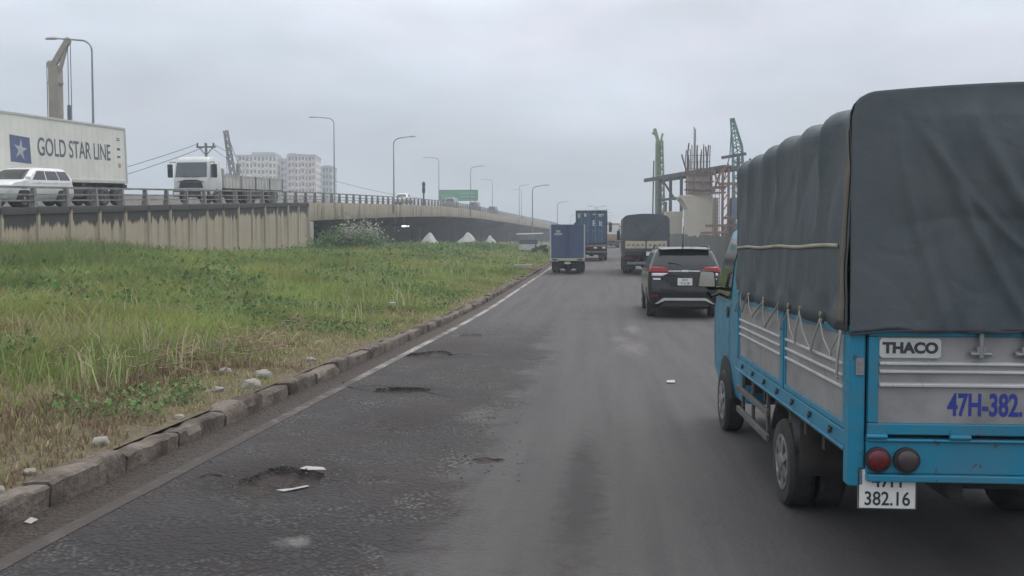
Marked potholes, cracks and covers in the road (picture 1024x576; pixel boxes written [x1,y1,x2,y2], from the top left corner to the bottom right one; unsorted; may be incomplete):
pothole [236,466,327,494]
pothole [406,351,451,359]
